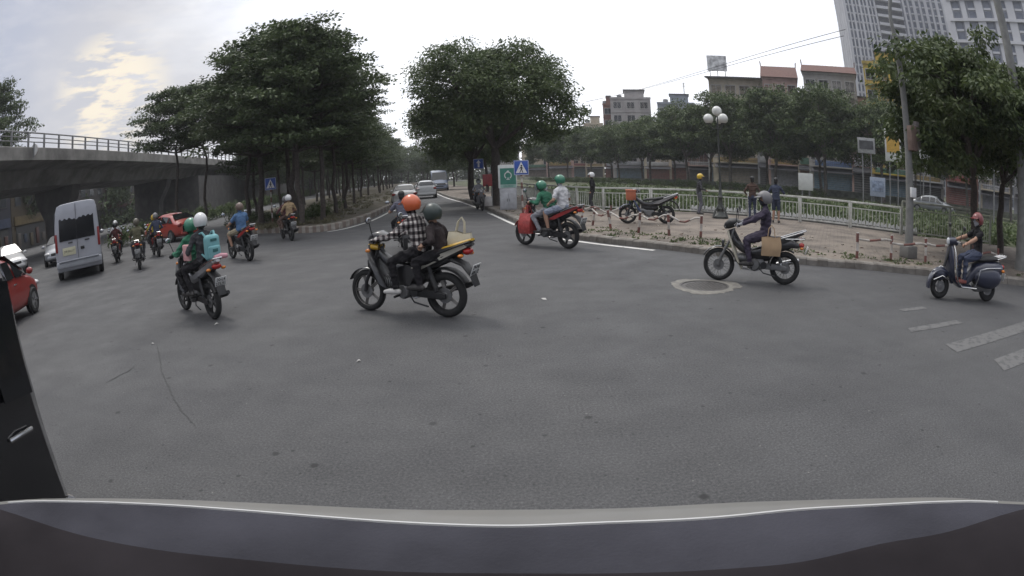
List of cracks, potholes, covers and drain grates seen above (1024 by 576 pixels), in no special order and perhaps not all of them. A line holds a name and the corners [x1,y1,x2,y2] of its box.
crack [157,346,195,425]
manhole cover [671,279,743,295]
